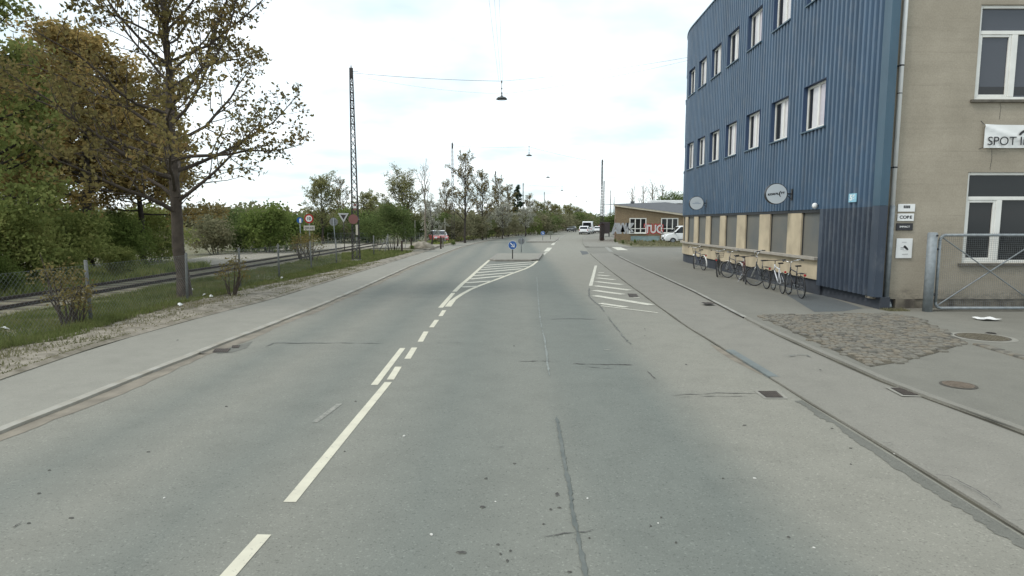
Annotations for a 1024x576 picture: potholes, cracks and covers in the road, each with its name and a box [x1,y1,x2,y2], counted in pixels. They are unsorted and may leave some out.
manhole cover [939,381,978,389]
drain grate [886,387,922,397]
drain grate [753,390,788,399]
manhole cover [951,332,1019,343]
